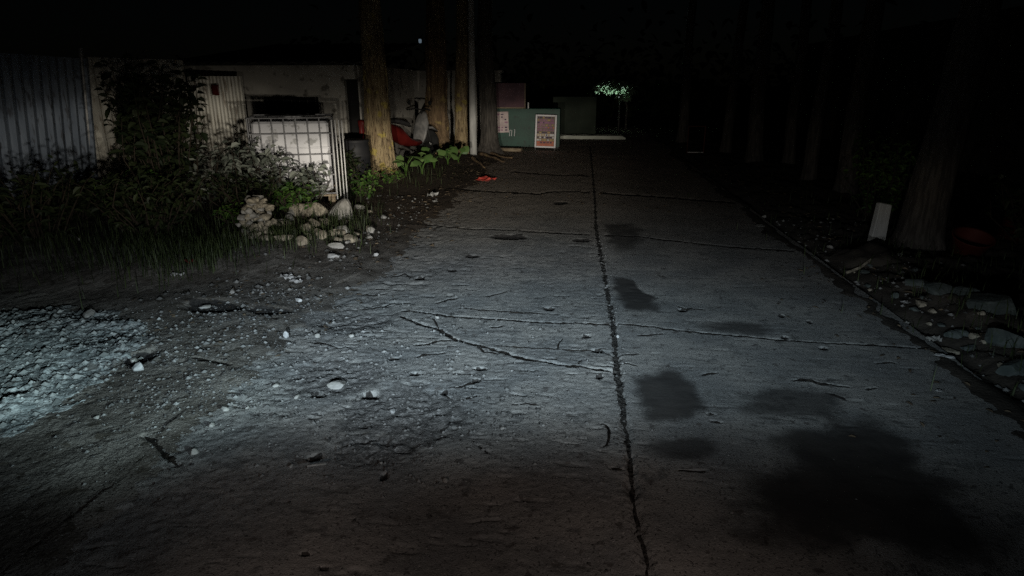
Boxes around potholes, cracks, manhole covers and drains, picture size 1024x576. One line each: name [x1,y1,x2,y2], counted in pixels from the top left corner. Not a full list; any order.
pothole [187,299,244,313]
crack [793,379,849,399]
pothole [125,351,161,366]
crack [330,292,637,375]
crack [145,437,178,466]
